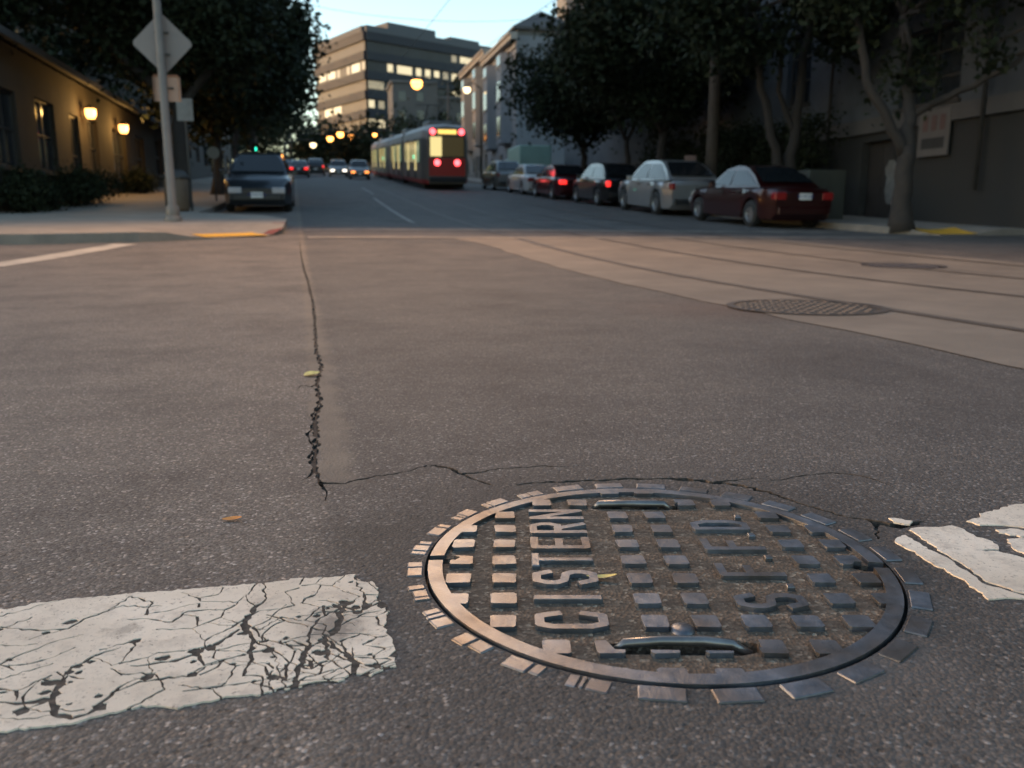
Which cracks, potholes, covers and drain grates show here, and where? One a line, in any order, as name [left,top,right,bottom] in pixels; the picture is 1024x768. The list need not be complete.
manhole cover [726,299,890,315]
crack [296,242,925,539]
manhole cover [406,483,933,704]
